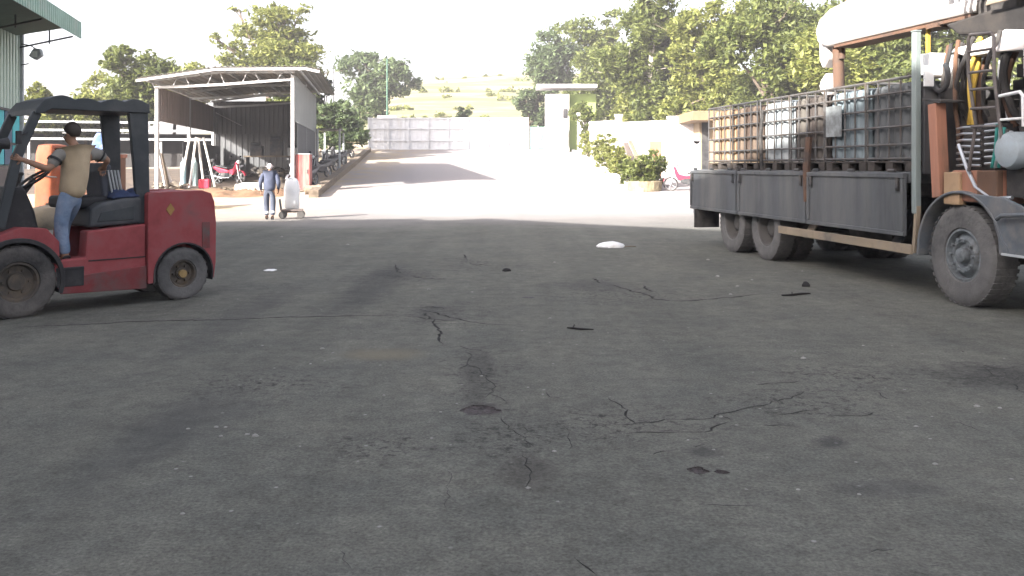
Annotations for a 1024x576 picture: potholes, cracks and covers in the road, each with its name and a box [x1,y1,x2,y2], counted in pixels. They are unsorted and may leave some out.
crack [592,278,757,301]
crack [460,346,505,401]
crack [501,372,979,494]
pothole [687,466,710,475]
pothole [459,405,502,415]
